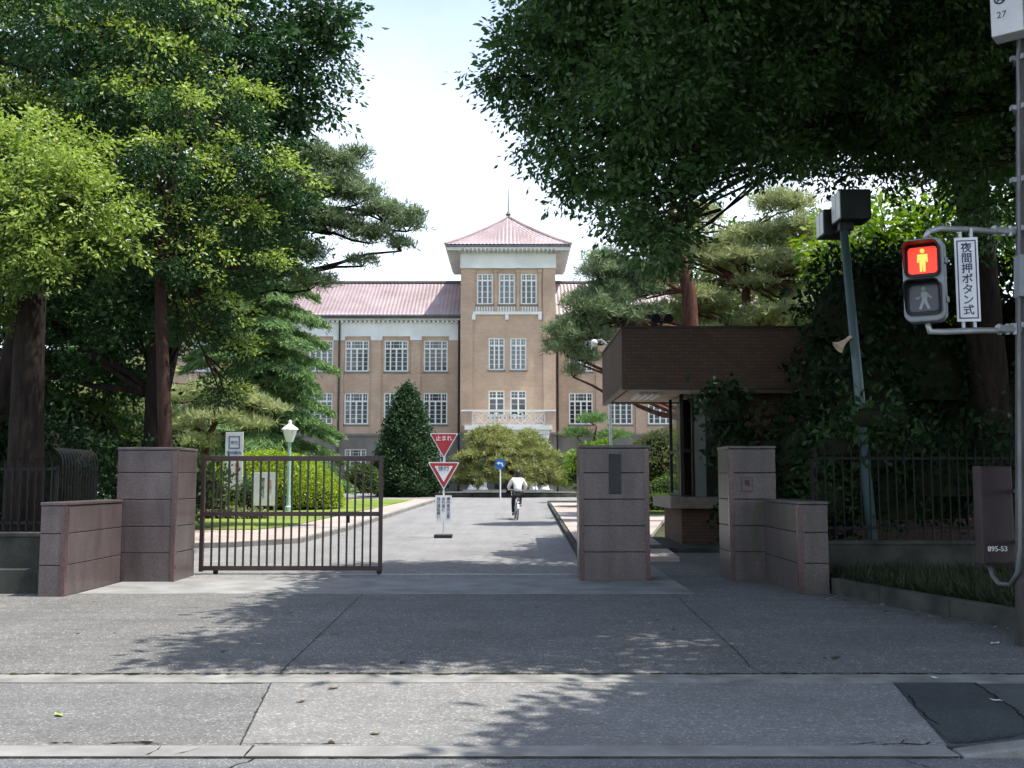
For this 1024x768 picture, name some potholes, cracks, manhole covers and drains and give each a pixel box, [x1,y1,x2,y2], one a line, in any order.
crack [857,738,931,767]
